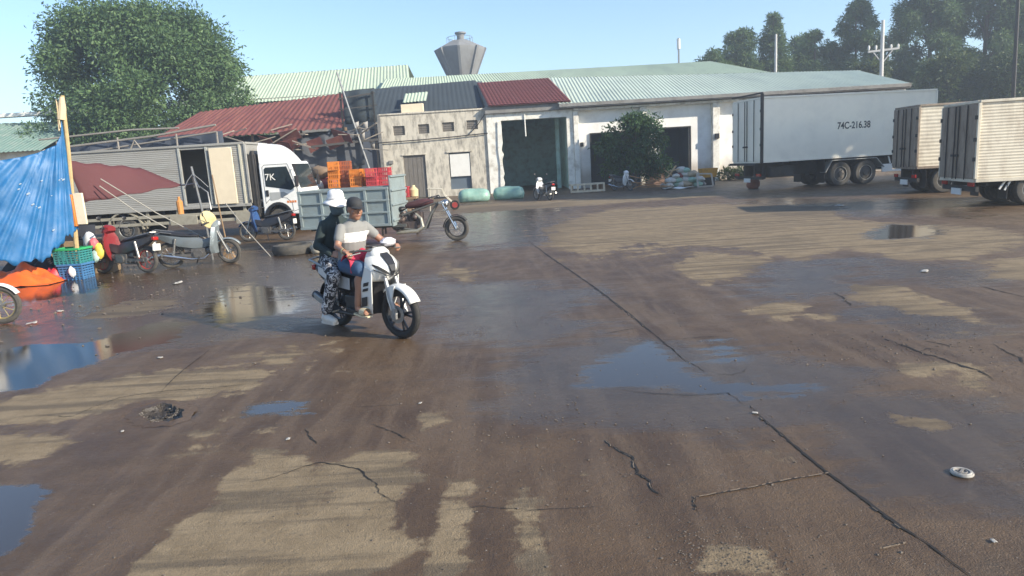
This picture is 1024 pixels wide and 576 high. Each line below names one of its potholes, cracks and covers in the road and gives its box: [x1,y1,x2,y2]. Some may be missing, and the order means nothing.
crack [885,339,994,380]
pothole [125,400,198,428]
crack [23,349,262,417]
crack [618,388,971,576]
crack [262,462,394,501]
crack [605,440,661,495]
